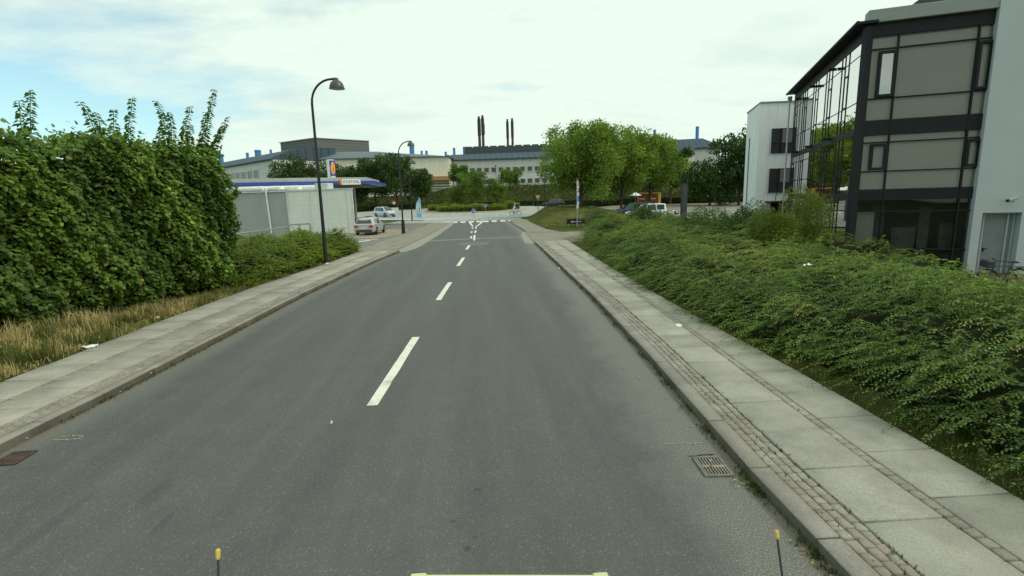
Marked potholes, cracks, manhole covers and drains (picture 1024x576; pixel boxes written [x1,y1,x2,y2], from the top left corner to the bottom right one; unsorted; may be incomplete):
drain grate [692,456,734,477]
crack [664,442,713,456]
drain grate [0,450,38,466]
